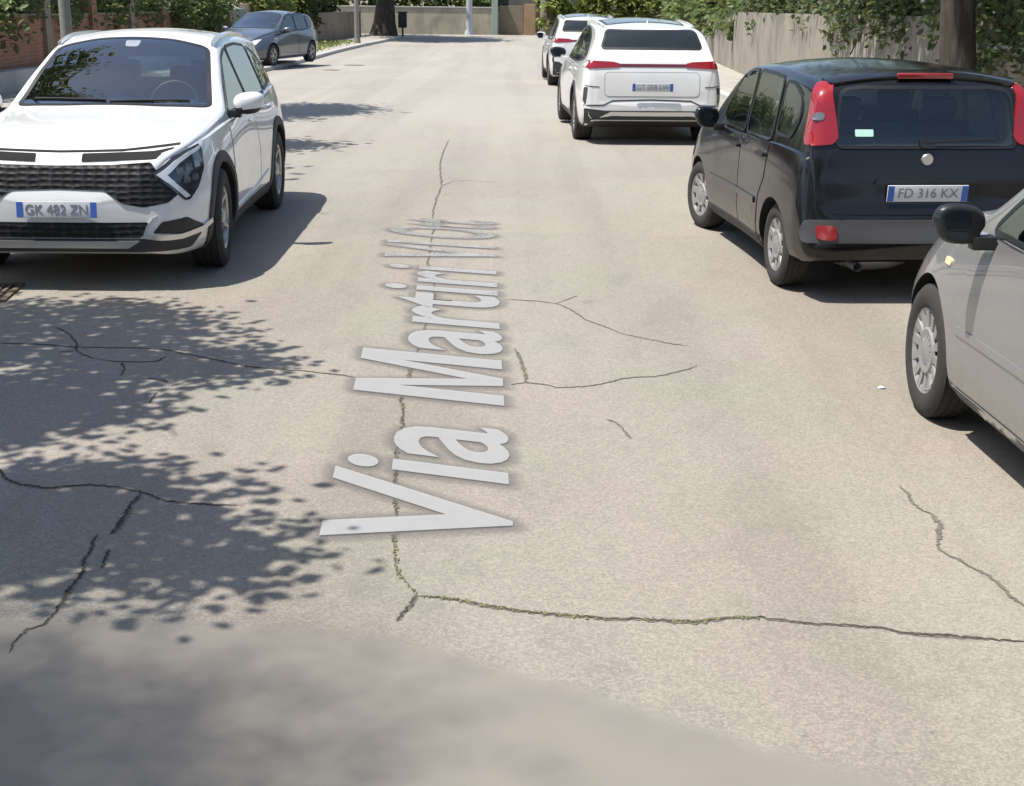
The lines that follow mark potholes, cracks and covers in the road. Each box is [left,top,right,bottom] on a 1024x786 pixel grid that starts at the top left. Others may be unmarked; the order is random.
drain grate [0,282,25,302]
crack [4,327,356,403]
crack [0,469,241,652]
crack [391,140,1024,642]
